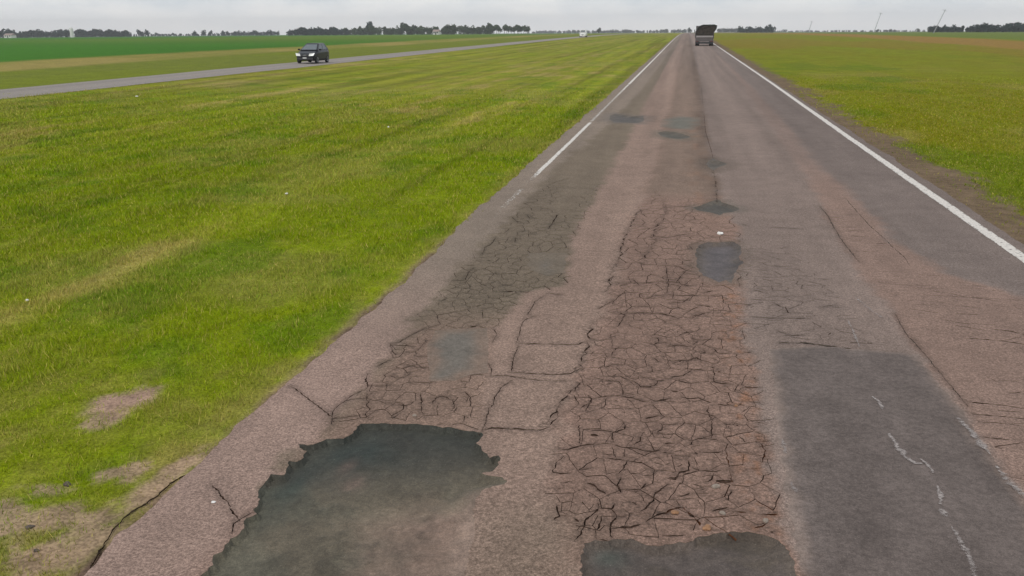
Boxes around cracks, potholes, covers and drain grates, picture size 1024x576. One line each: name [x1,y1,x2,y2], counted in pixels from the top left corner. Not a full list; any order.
crack [292,182,1023,541]
crack [213,487,249,532]
